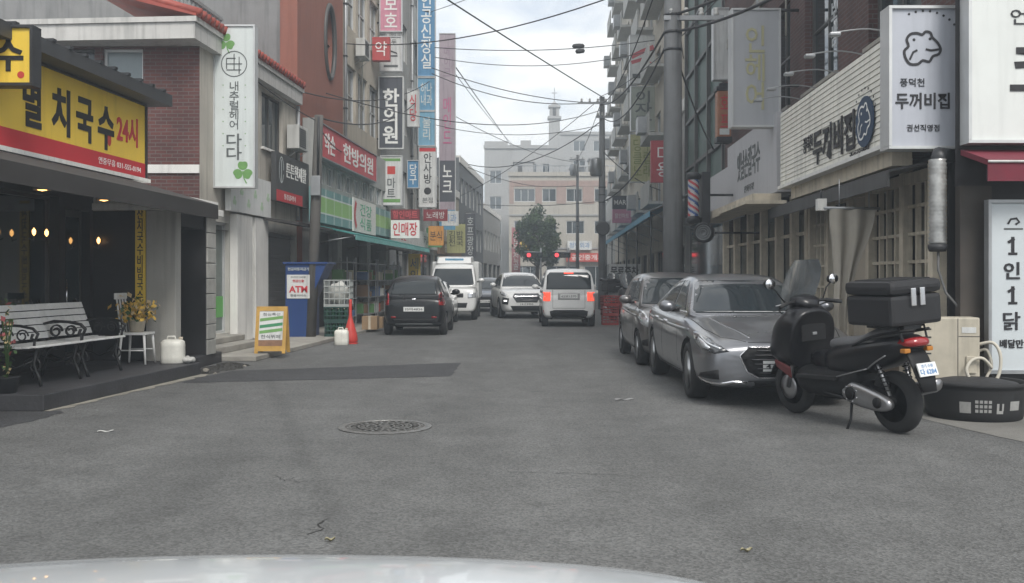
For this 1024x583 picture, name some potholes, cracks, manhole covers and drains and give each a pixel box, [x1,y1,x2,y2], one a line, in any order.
manhole cover [338,419,432,434]
